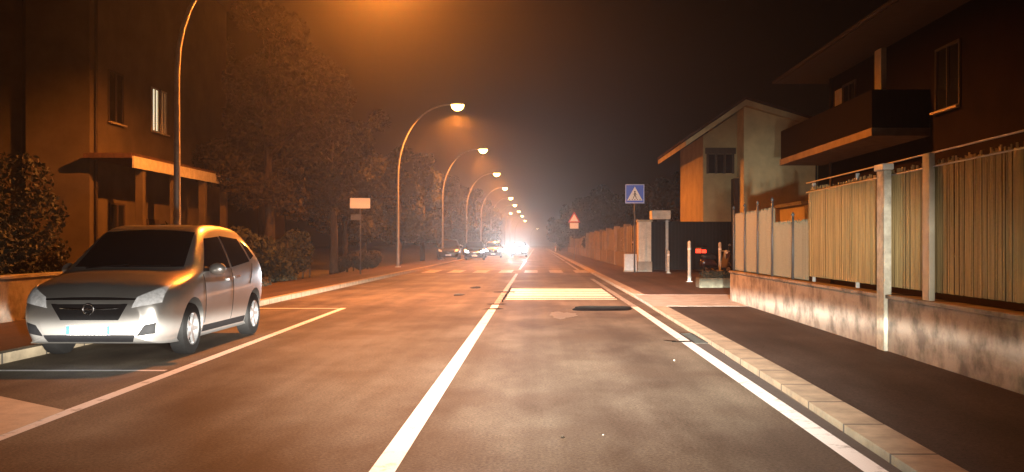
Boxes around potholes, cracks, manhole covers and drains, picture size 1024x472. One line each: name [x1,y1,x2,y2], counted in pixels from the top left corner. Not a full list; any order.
drain grate [679,333,708,343]
